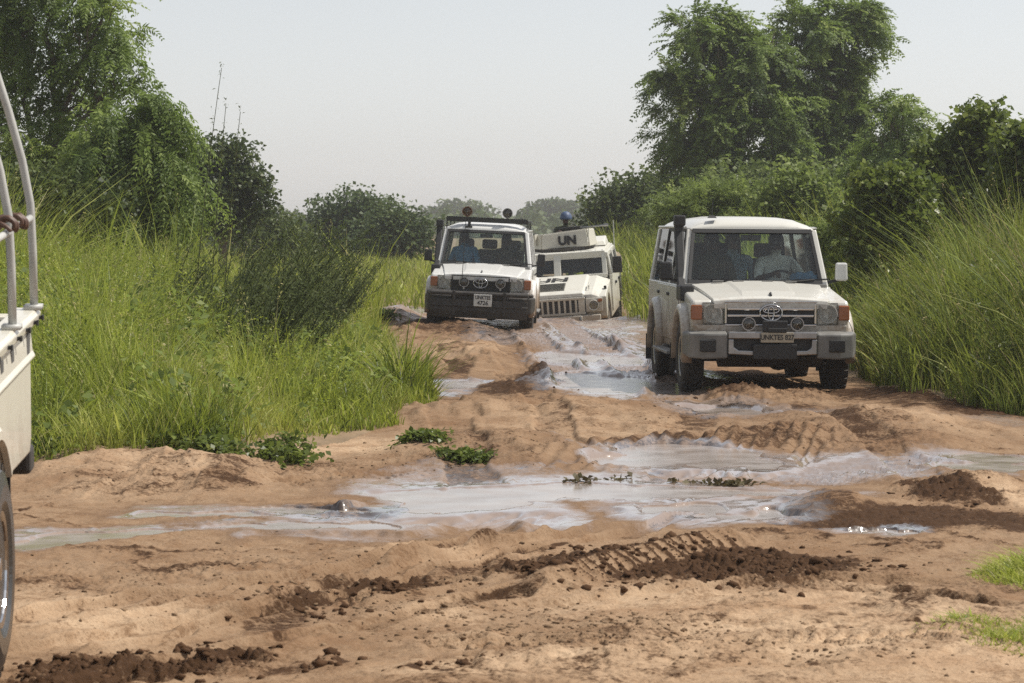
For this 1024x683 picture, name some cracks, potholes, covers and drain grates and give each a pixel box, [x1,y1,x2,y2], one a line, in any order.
pothole [925,449,1024,473]
pothole [834,524,925,535]
pothole [194,519,419,532]
pothole [538,363,719,396]
pothole [524,345,647,366]
pothole [570,431,794,472]
pothole [15,526,198,551]
pothole [103,500,391,520]
pothole [316,479,837,517]
